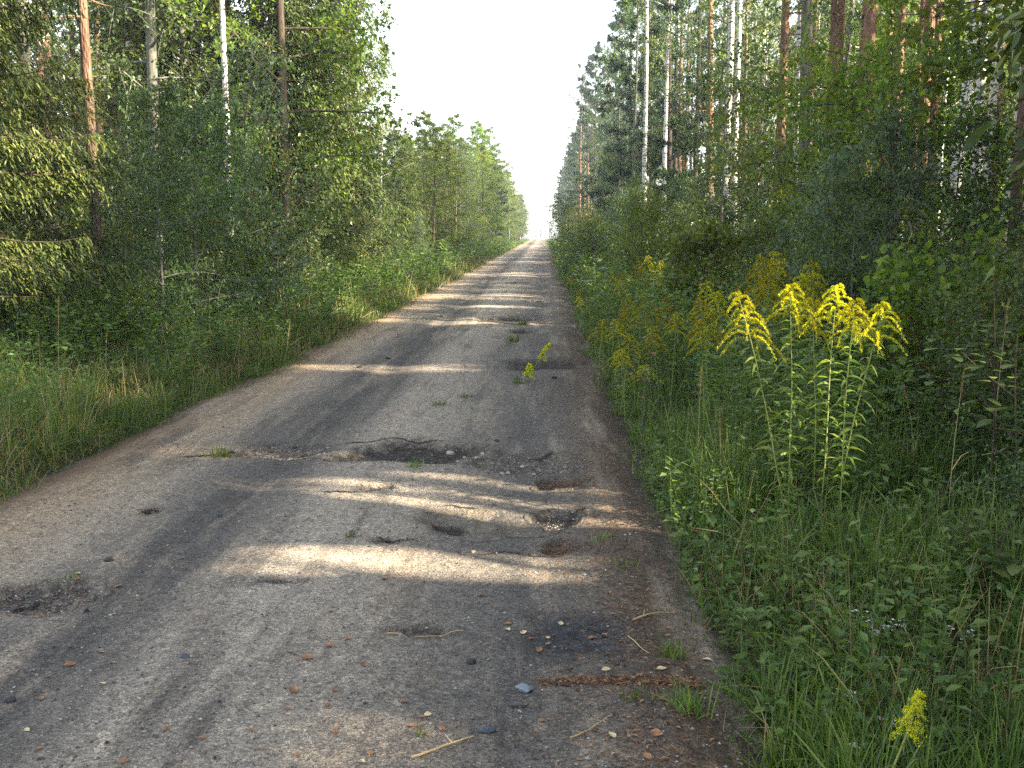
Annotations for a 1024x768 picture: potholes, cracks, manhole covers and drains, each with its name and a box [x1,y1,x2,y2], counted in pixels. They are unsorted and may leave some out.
pothole [366,536,400,545]
pothole [308,436,501,466]
pothole [139,506,162,516]
pothole [498,356,586,372]
pothole [530,476,595,492]
pothole [401,502,561,543]
pothole [523,508,585,534]
pothole [467,315,558,325]
pothole [0,576,113,618]
pothole [376,622,457,639]
